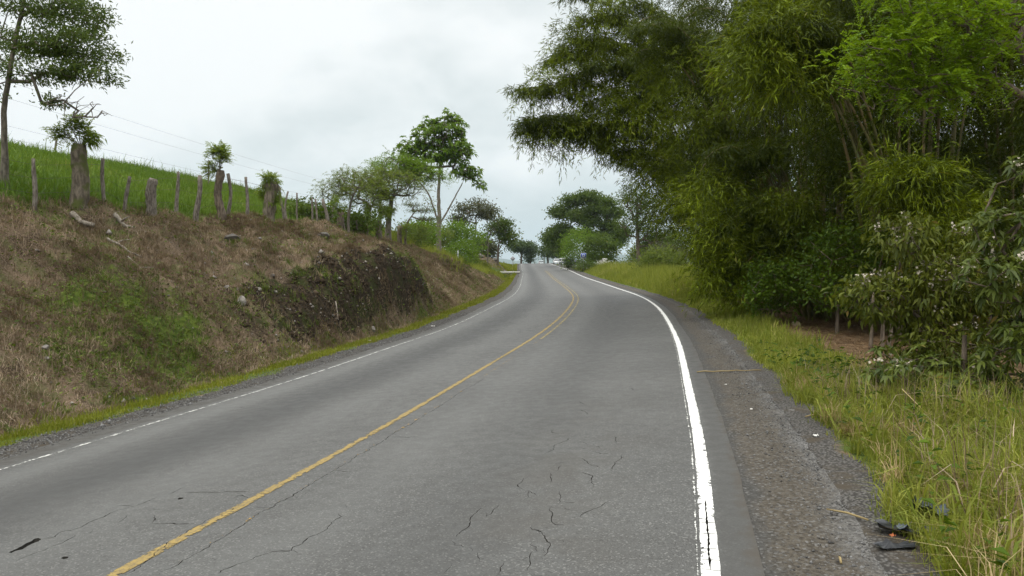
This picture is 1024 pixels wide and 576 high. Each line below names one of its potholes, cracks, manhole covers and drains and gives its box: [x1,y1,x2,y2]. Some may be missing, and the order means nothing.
crack [705,501,718,570]
crack [21,379,483,576]
crack [517,432,623,576]
